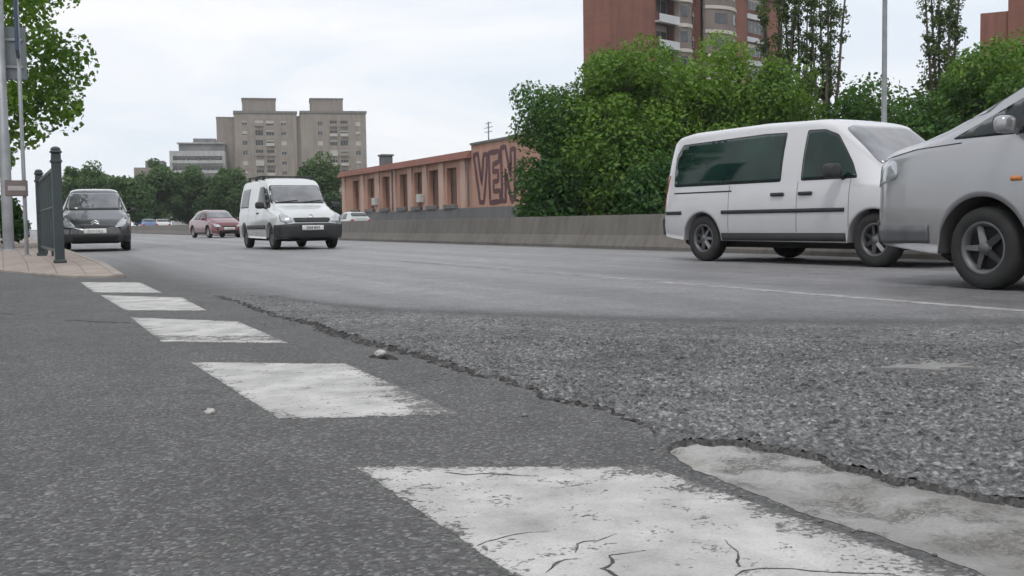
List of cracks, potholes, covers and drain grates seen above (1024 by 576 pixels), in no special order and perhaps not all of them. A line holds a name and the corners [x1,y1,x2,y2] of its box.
pothole [666,439,1024,576]
crack [546,533,645,576]
